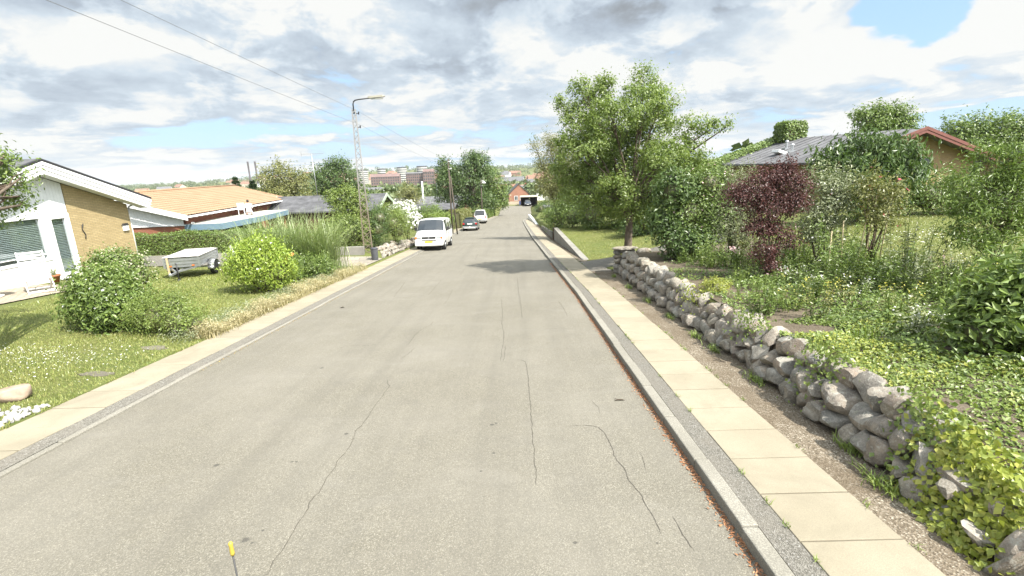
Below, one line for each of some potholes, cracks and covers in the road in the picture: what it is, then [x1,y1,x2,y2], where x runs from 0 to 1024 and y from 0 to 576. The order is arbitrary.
crack [482,278,567,471]
crack [574,425,690,545]
crack [266,379,390,575]
